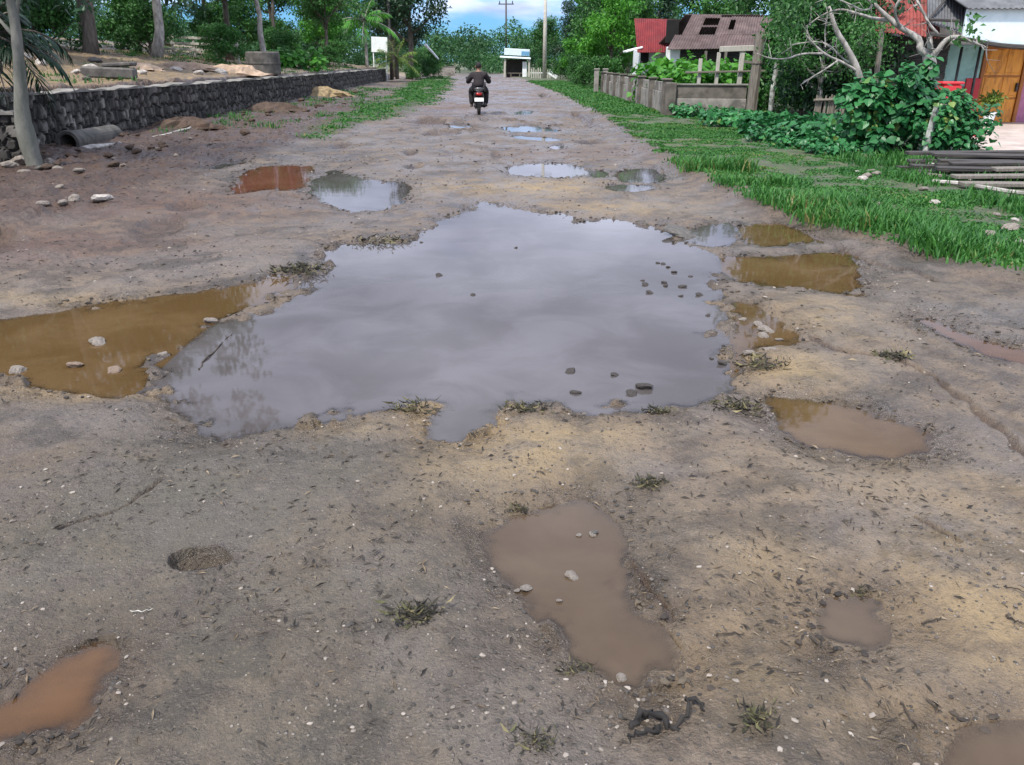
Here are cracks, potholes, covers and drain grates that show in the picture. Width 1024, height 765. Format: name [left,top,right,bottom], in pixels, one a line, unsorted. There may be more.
pothole [742,388,956,467]
pothole [299,169,418,213]
pothole [595,180,668,192]
pothole [464,485,714,714]
pothole [0,618,154,765]
pothole [738,217,826,248]
pothole [498,160,598,179]
pothole [133,197,743,451]
pothole [729,296,813,383]
pothole [222,162,321,195]
pothole [721,247,877,297]
